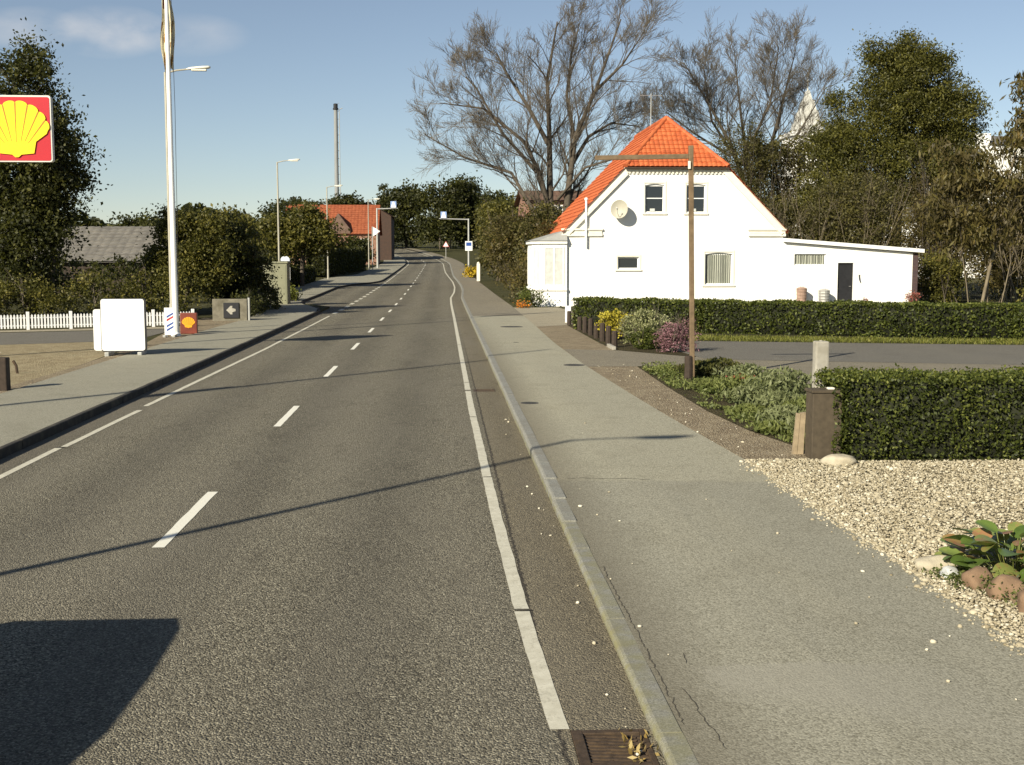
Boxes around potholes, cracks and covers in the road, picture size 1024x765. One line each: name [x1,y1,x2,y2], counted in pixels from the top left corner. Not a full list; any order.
crack [603,566,724,747]
drain grate [571,729,659,765]
